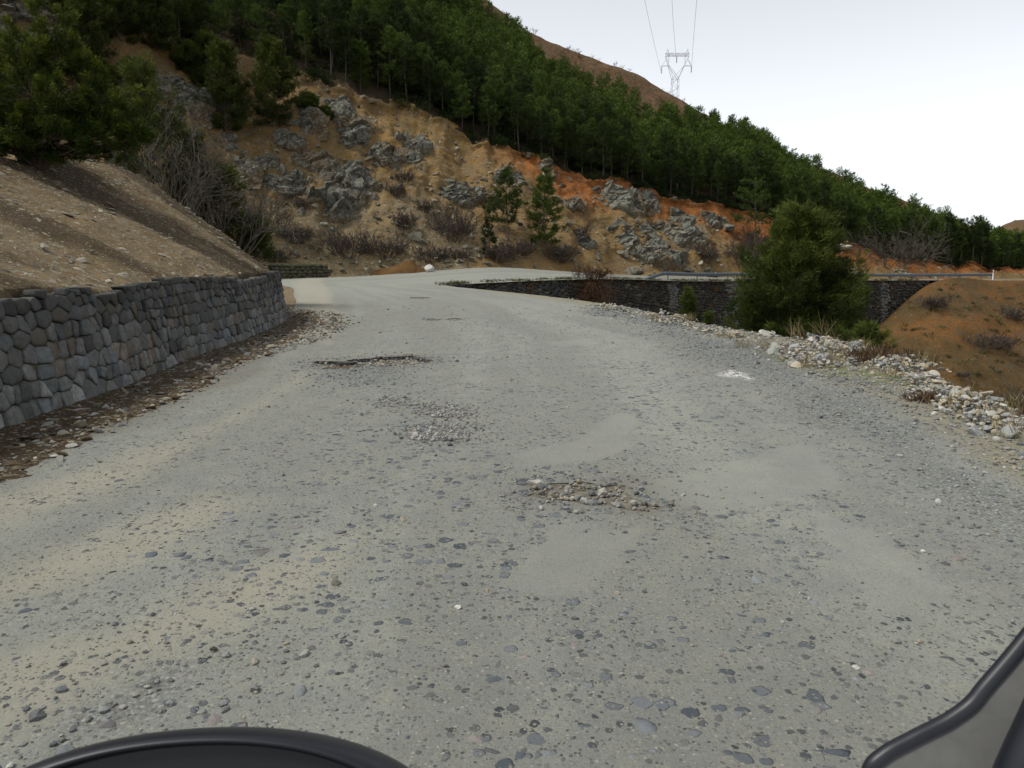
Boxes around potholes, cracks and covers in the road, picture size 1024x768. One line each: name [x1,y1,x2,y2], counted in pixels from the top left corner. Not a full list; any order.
pothole [378,399,408,407]
pothole [312,356,433,369]
pothole [405,422,475,442]
pothole [422,404,473,419]
pothole [528,479,664,512]
